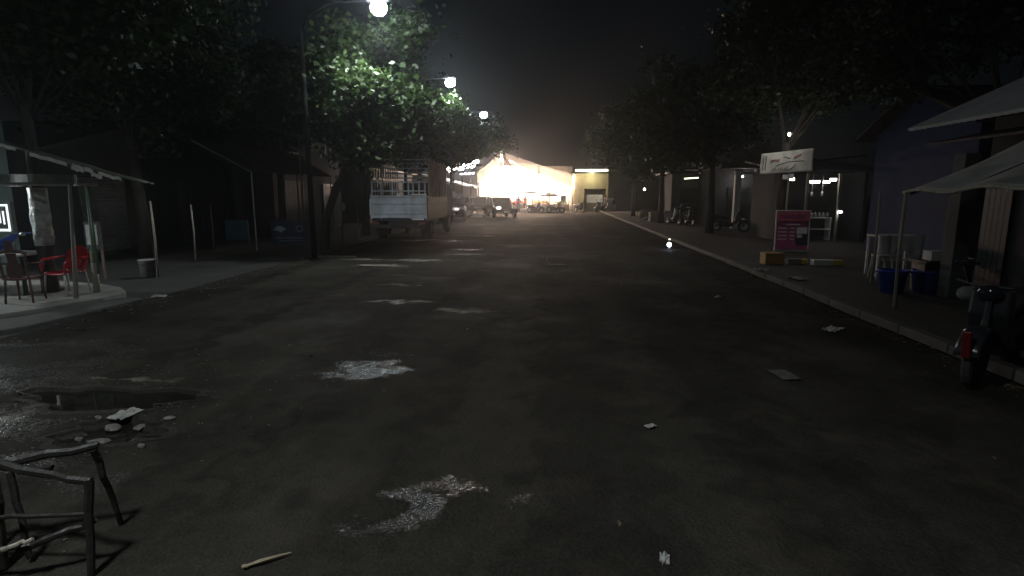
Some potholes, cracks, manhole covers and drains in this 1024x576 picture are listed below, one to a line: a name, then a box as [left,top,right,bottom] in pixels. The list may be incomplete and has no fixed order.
pothole [11,385,222,415]
